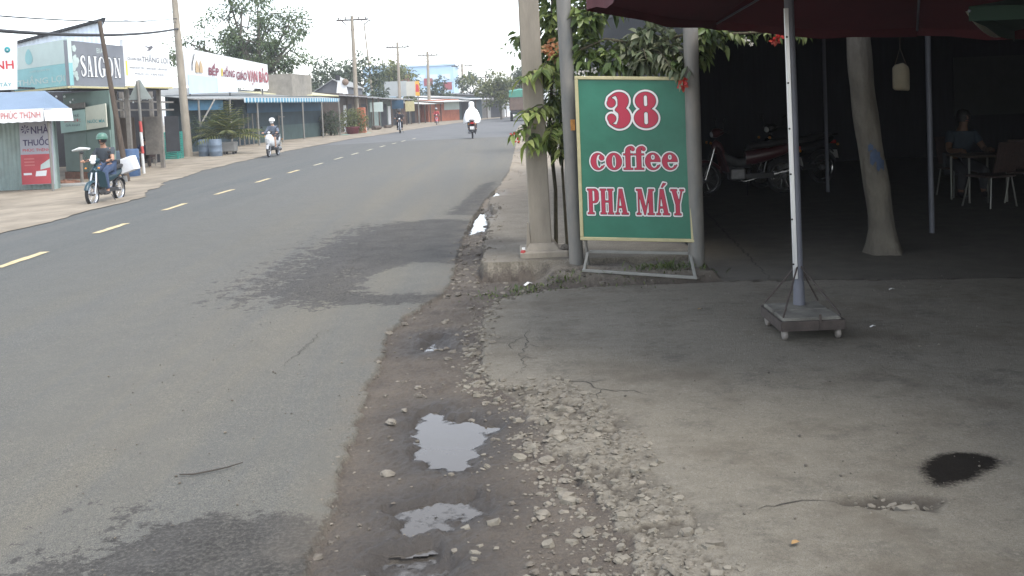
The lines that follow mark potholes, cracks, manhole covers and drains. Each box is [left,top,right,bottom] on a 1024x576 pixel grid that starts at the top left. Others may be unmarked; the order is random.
pothole [825,489,948,513]
pothole [411,332,450,355]
pothole [467,210,490,235]
pothole [382,487,496,559]
pothole [402,404,510,476]
